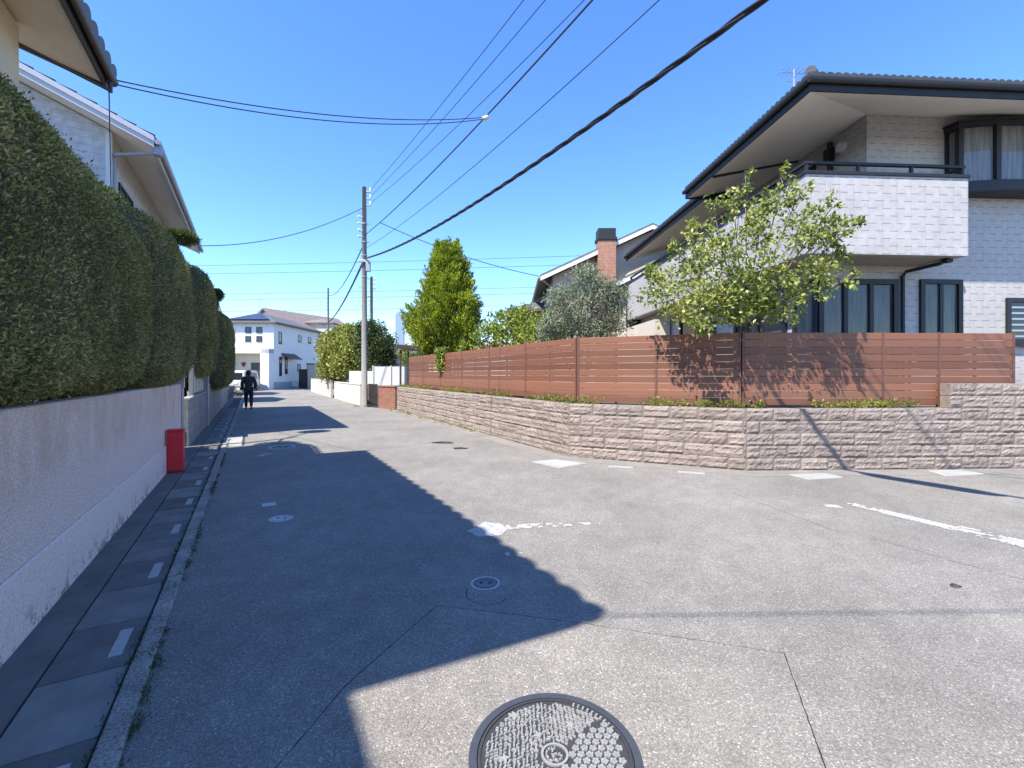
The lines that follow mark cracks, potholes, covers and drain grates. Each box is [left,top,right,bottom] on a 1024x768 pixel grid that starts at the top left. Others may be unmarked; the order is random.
manhole cover [471,576,500,590]
manhole cover [468,693,644,768]
